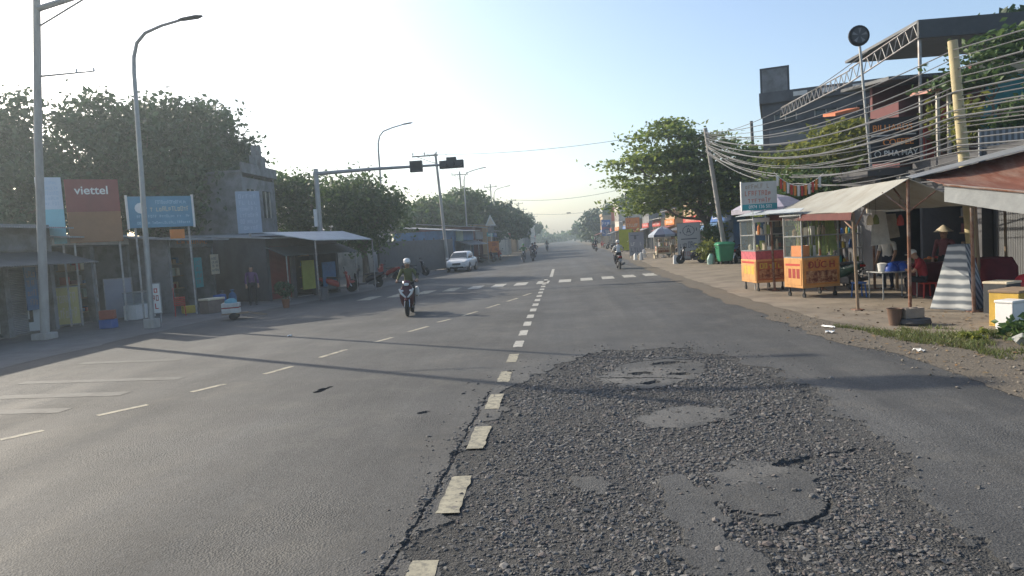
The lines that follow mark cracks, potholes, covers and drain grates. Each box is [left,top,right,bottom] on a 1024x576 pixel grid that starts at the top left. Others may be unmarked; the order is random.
crack [380,391,492,576]
pothole [401,347,1024,576]
